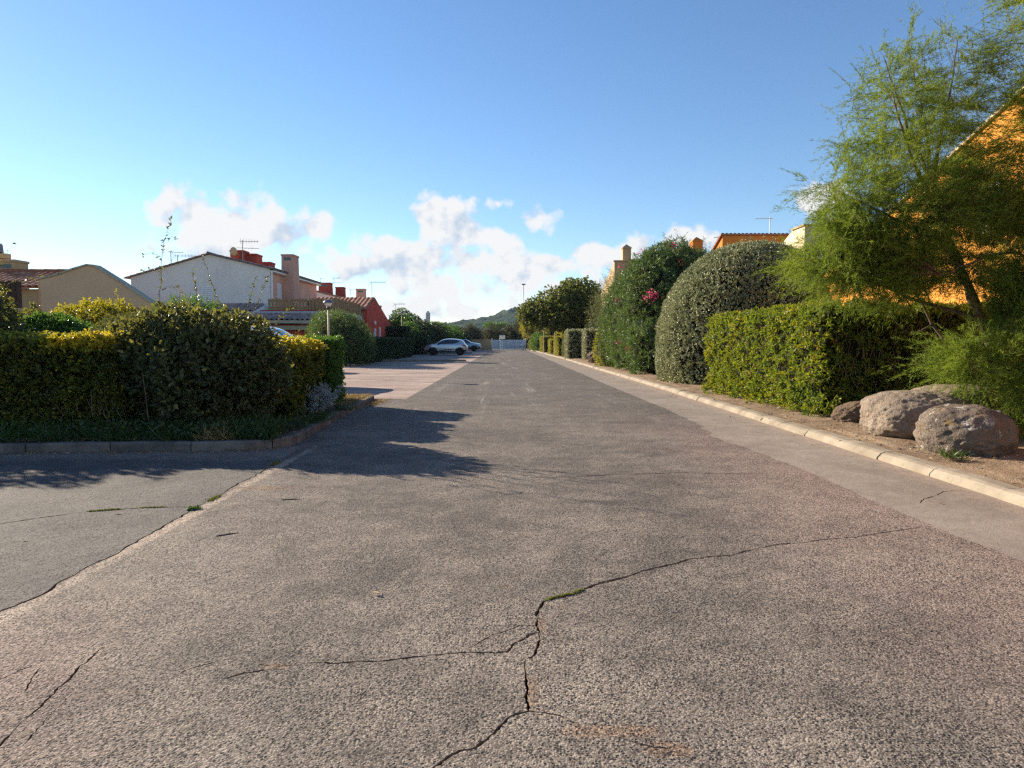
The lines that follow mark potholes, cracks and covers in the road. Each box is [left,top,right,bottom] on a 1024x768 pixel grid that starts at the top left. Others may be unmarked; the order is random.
crack [181,526,926,768]
crack [0,647,103,746]
